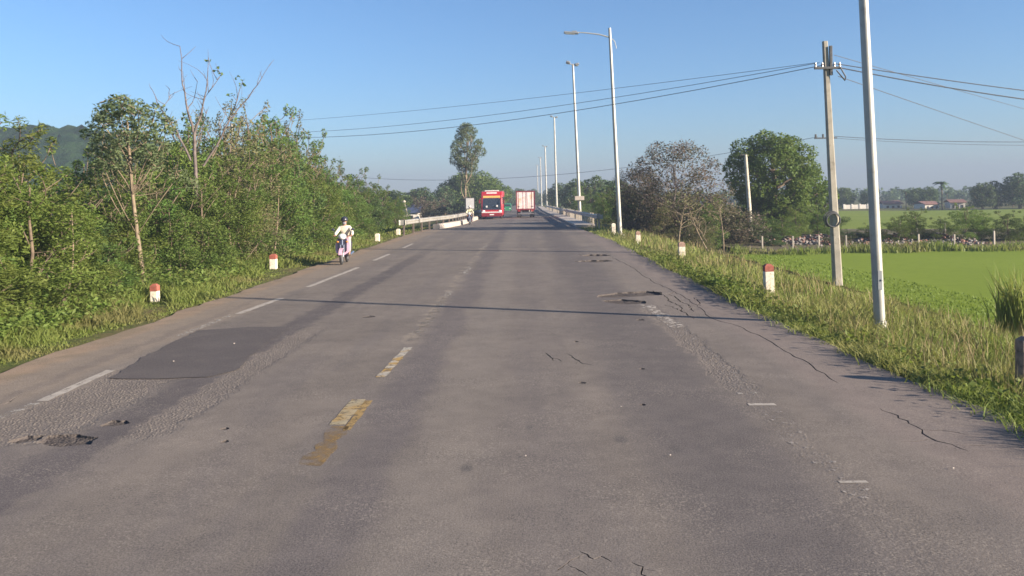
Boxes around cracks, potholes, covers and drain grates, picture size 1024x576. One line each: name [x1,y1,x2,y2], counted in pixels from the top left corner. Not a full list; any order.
crack [557,551,611,575]
pothole [36,434,98,447]
crack [881,409,995,451]
pothole [8,435,45,444]
crack [610,256,838,383]
